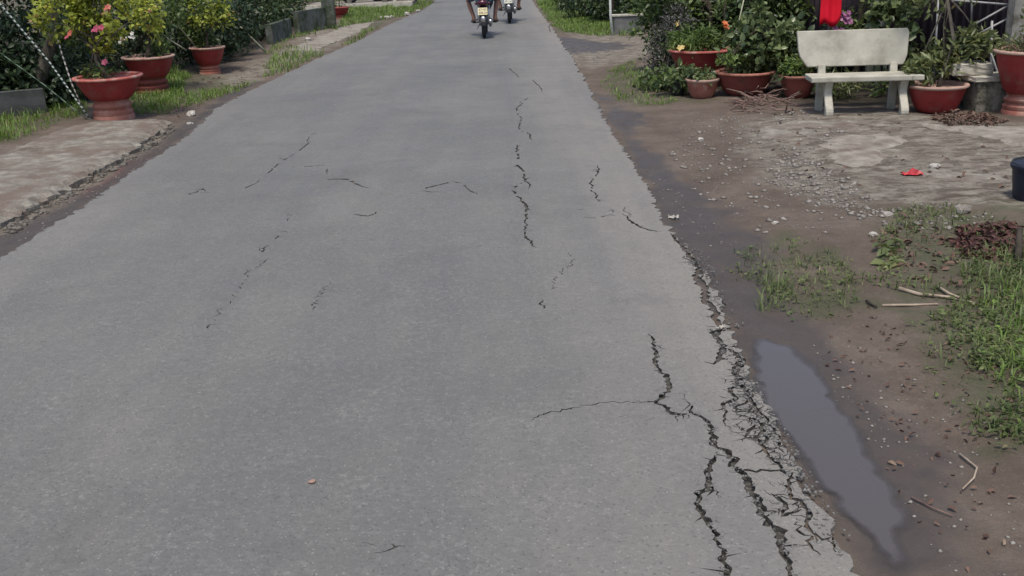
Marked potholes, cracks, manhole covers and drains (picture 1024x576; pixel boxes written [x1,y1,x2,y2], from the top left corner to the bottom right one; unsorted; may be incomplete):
crack [533,234,839,576]
crack [580,166,657,232]
crack [509,68,542,247]
crack [246,134,368,188]
crack [206,214,292,328]
